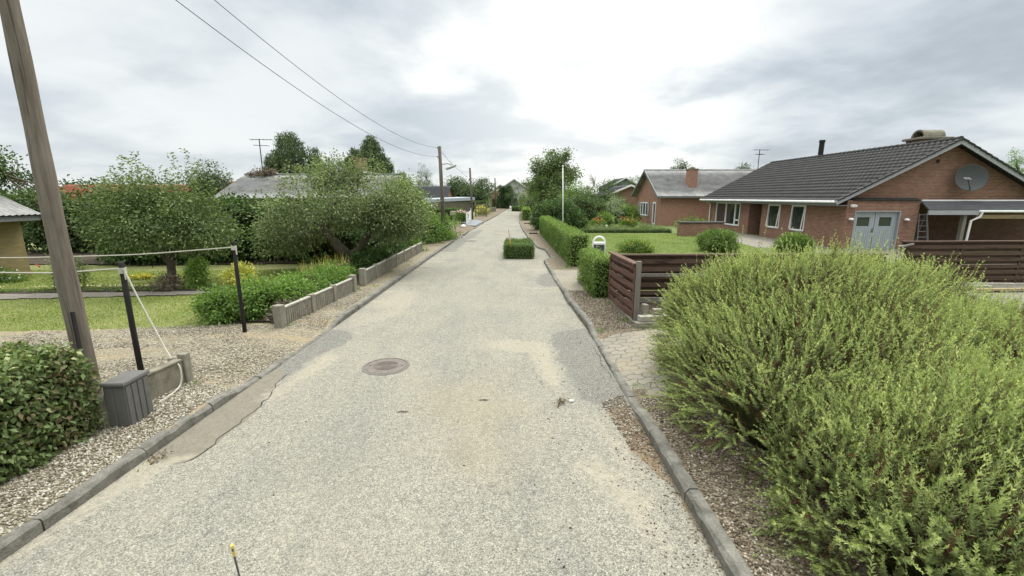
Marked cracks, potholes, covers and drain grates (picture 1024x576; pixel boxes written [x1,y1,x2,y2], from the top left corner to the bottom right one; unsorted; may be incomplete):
manhole cover [362,358,410,375]
